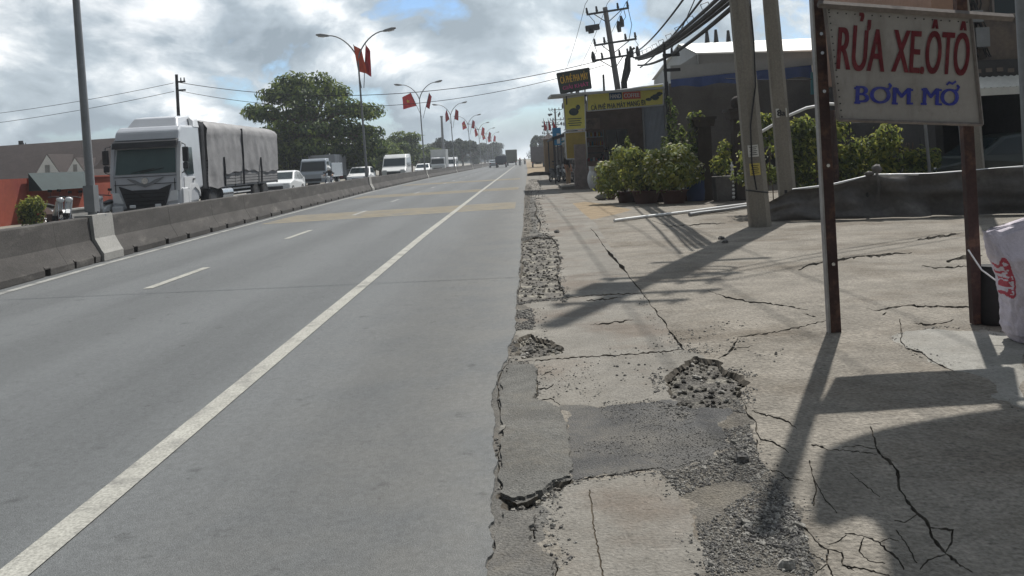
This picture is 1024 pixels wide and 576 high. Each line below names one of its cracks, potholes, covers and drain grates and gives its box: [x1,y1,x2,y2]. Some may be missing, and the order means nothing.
crack [709,291,826,359]
pothole [518,237,565,302]
crack [497,358,511,490]
pothole [514,334,564,359]
pothole [496,479,574,511]
pothole [664,356,751,409]
crack [738,396,973,576]
crack [871,304,969,371]
crack [798,233,982,270]
